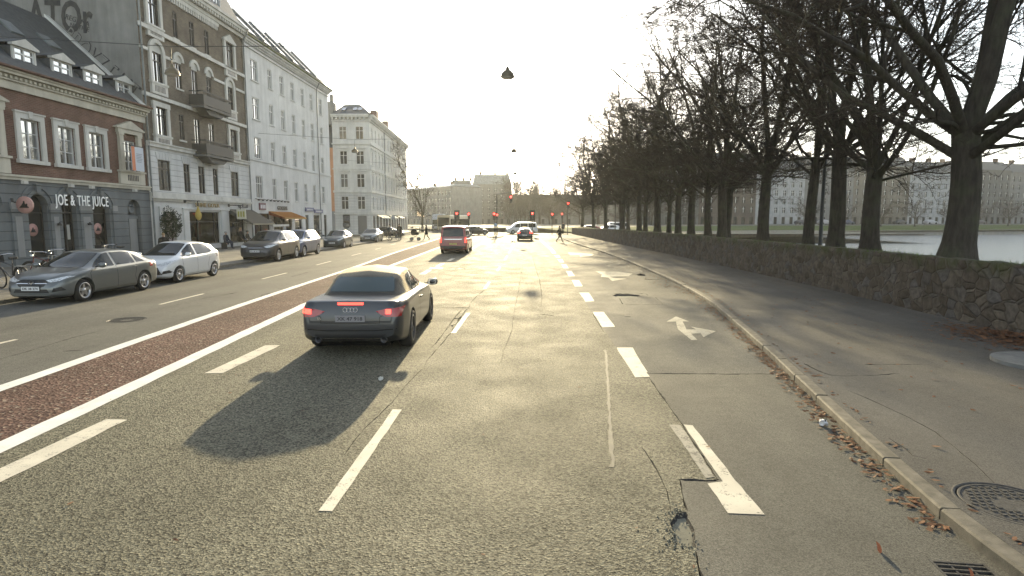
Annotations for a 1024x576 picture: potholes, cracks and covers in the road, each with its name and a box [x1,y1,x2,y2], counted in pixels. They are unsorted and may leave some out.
drain grate [929,560,998,576]
crack [805,364,911,378]
crack [642,447,671,511]
pothole [656,502,709,569]
crack [424,291,483,366]
manhole cover [951,482,1024,525]
